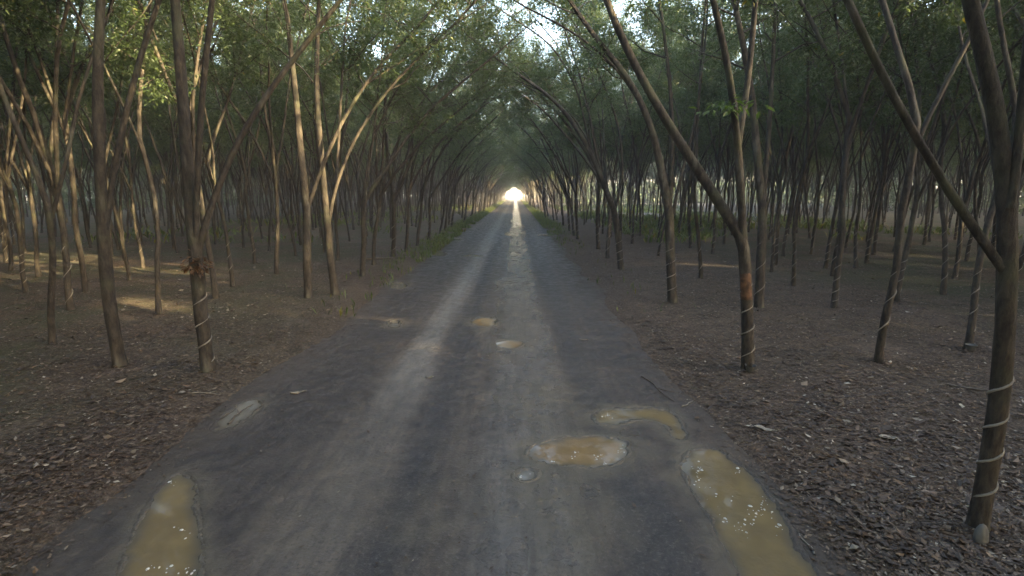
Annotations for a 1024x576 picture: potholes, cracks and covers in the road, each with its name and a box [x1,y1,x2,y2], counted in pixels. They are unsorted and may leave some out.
pothole [679,447,823,576]
pothole [209,398,263,432]
pothole [470,317,499,327]
pothole [494,339,525,349]
pothole [524,433,632,469]
